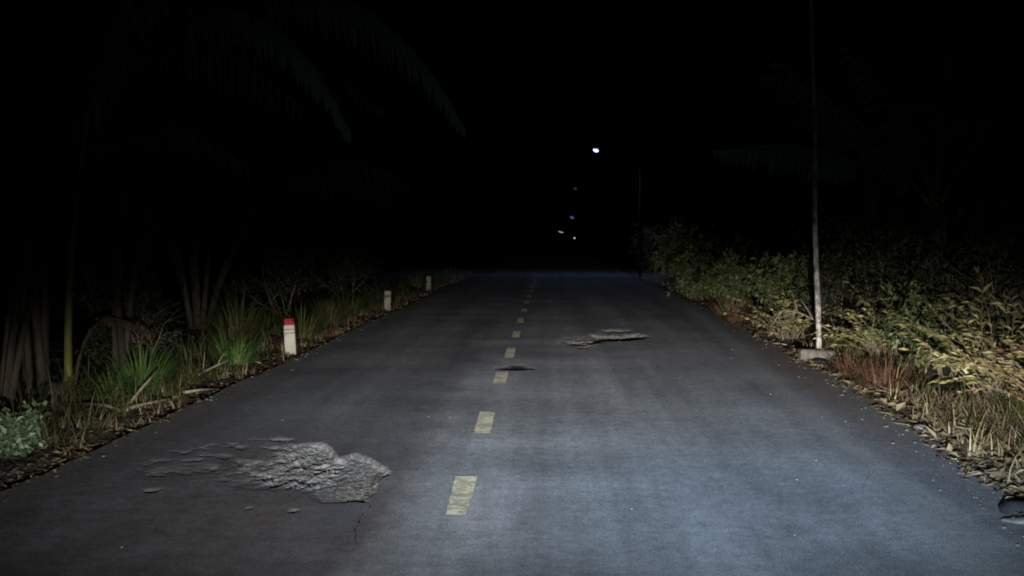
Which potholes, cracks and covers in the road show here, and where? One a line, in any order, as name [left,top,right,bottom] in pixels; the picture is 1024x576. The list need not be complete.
pothole [136,436,393,504]
pothole [490,363,541,371]
pothole [551,328,651,351]
crack [353,506,369,551]
